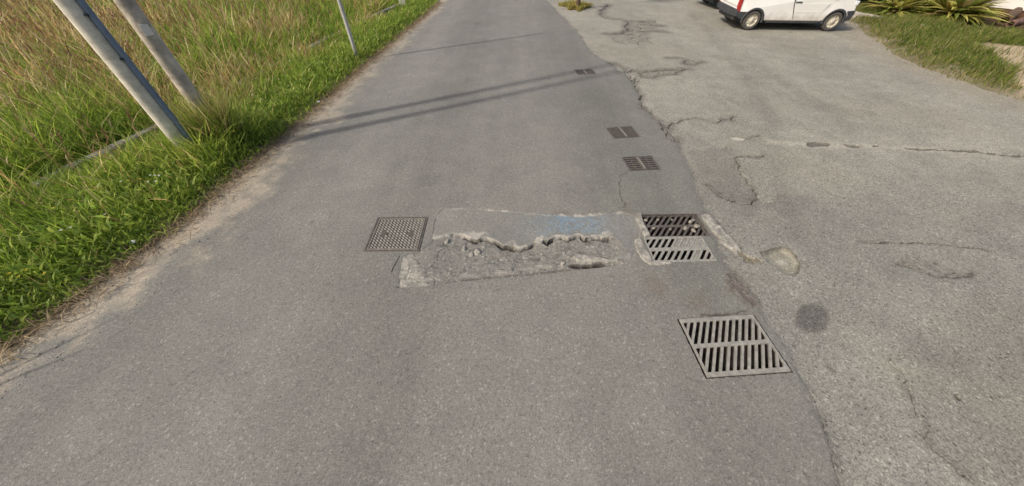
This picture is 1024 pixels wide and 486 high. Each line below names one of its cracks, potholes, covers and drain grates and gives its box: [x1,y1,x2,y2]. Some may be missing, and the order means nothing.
crack [929,148,1024,158]
manhole cover [363,217,428,252]
crack [856,240,996,280]
drain grate [677,314,794,379]
drain grate [641,214,711,243]
pothole [397,233,632,288]
drain grate [622,156,662,171]
drain grate [644,236,717,262]
drain grate [606,126,641,139]
crack [706,135,766,205]
crack [599,4,703,84]
